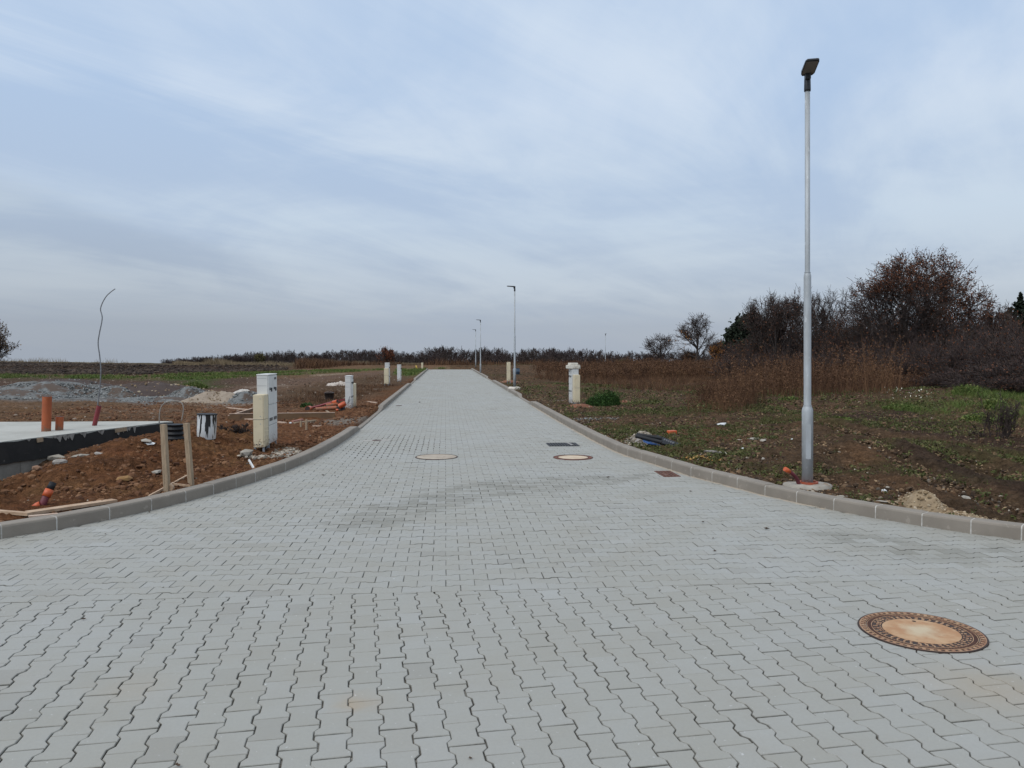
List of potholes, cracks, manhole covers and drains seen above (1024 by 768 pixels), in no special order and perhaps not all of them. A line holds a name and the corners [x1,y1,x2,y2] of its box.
manhole cover [857,611,989,654]
